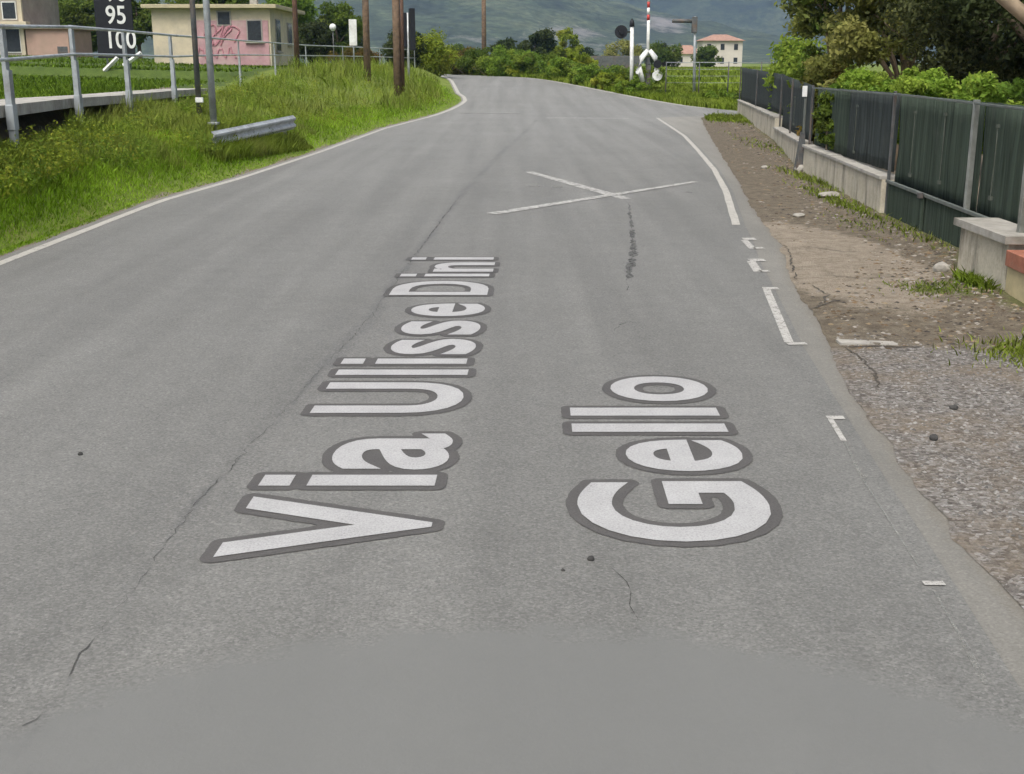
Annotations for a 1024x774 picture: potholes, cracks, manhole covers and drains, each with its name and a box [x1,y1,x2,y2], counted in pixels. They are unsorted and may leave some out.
crack [22,200,456,726]
